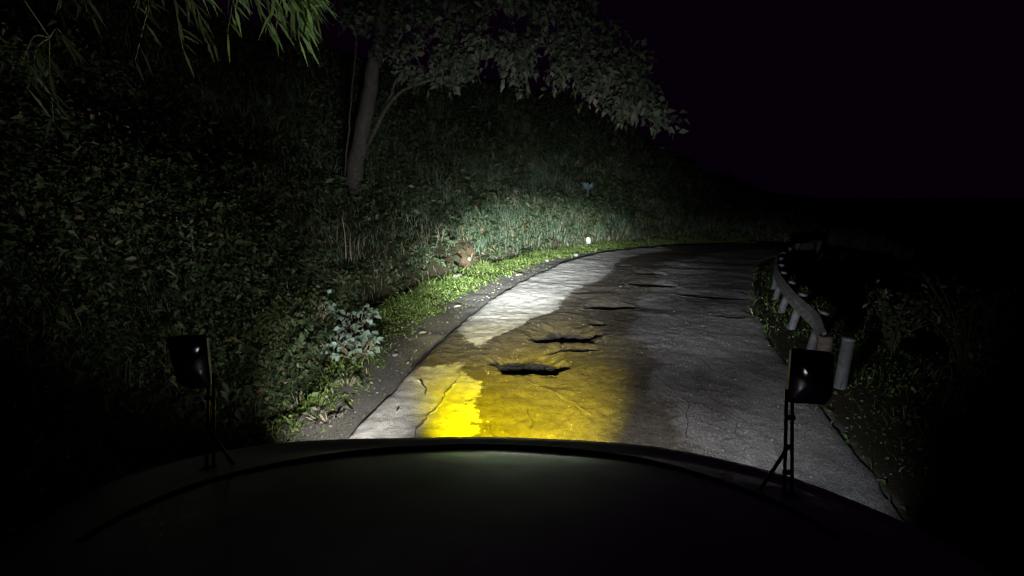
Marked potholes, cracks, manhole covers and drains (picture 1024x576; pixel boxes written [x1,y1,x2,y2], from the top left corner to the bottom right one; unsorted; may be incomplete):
crack [395,368,464,438]
pothole [621,277,683,289]
pothole [577,297,642,311]
pothole [479,326,575,377]
crack [652,355,765,449]
pothole [534,342,610,358]
pothole [665,288,760,301]
